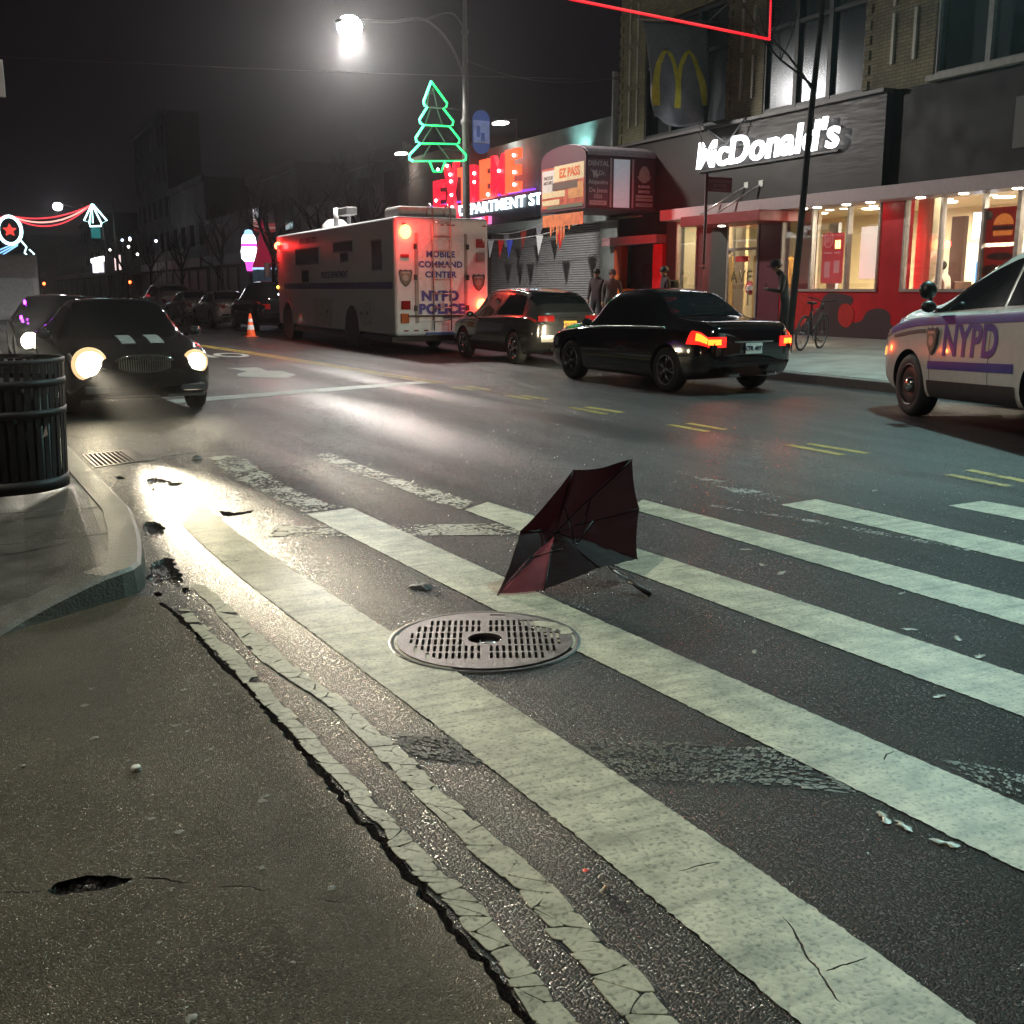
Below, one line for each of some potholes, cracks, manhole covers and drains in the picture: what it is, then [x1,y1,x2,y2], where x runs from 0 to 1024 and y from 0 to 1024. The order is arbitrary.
pothole [146,477,185,492]
pothole [48,875,132,896]
pothole [143,521,166,540]
crack [136,602,535,1024]
crack [782,916,865,1002]
drain grate [81,449,148,468]
pothole [146,558,184,589]
manhole cover [389,611,581,673]
